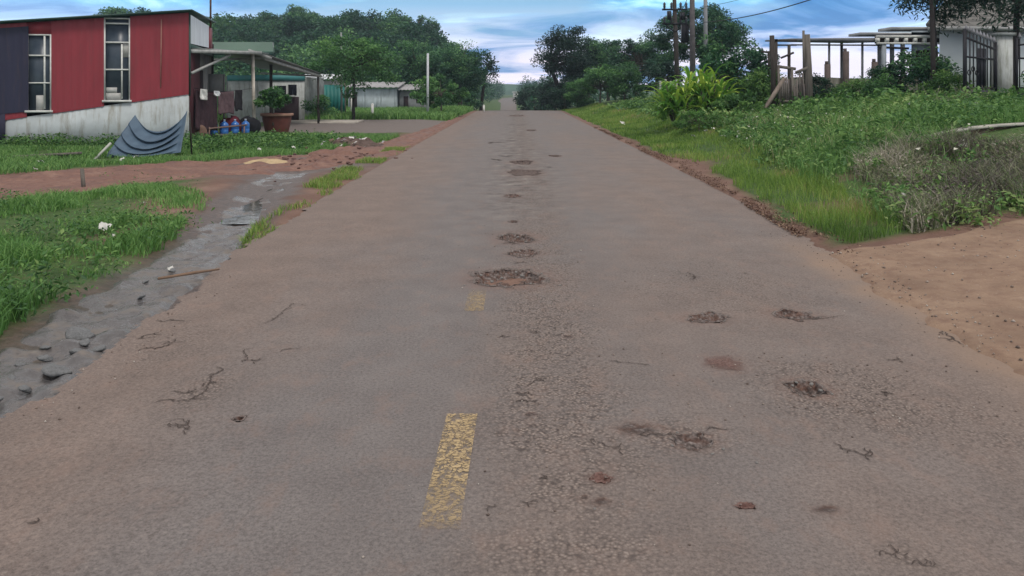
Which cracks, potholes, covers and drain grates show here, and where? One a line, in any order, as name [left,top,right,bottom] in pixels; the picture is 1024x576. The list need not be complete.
crack [566,432,683,454]
pothole [505,249,539,257]
crack [138,319,184,351]
pothole [470,267,550,288]
pothole [783,378,832,397]
crack [833,442,873,459]
pothole [670,432,713,451]
pothole [772,307,822,322]
crack [156,367,223,402]
pothole [497,233,534,243]
pothole [687,311,731,323]
crack [874,544,936,566]
